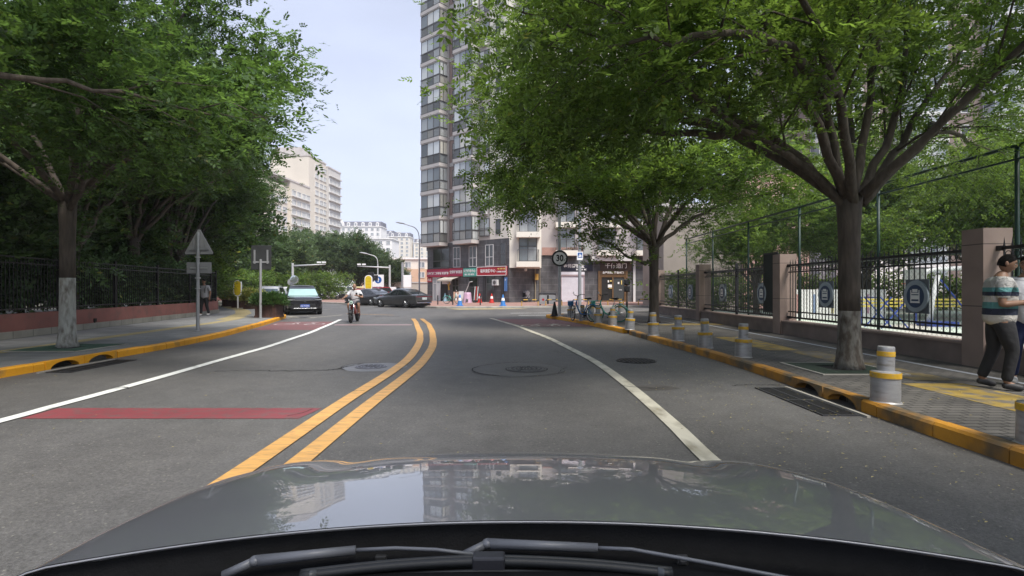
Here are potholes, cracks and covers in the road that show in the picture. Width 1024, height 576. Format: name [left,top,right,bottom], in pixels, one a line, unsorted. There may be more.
drain grate [36,359,137,374]
drain grate [755,386,871,418]
